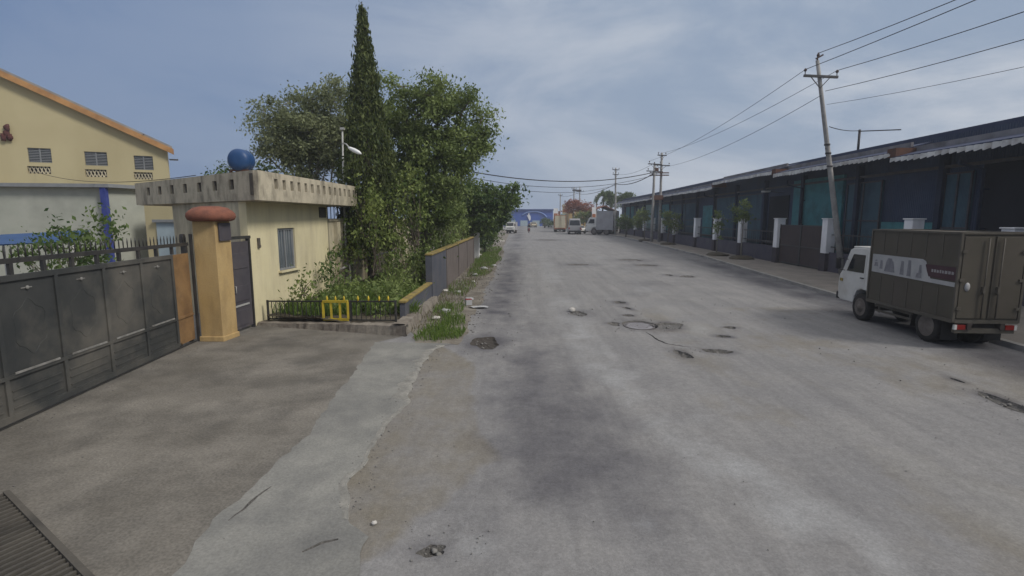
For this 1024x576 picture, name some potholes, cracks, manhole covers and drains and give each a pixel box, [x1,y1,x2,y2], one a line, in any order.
pothole [470,337,499,349]
crack [228,487,270,521]
crack [302,538,338,552]
pothole [416,544,446,558]
manhole cover [622,321,658,330]
pothole [977,391,1024,413]
drain grate [0,490,95,576]
